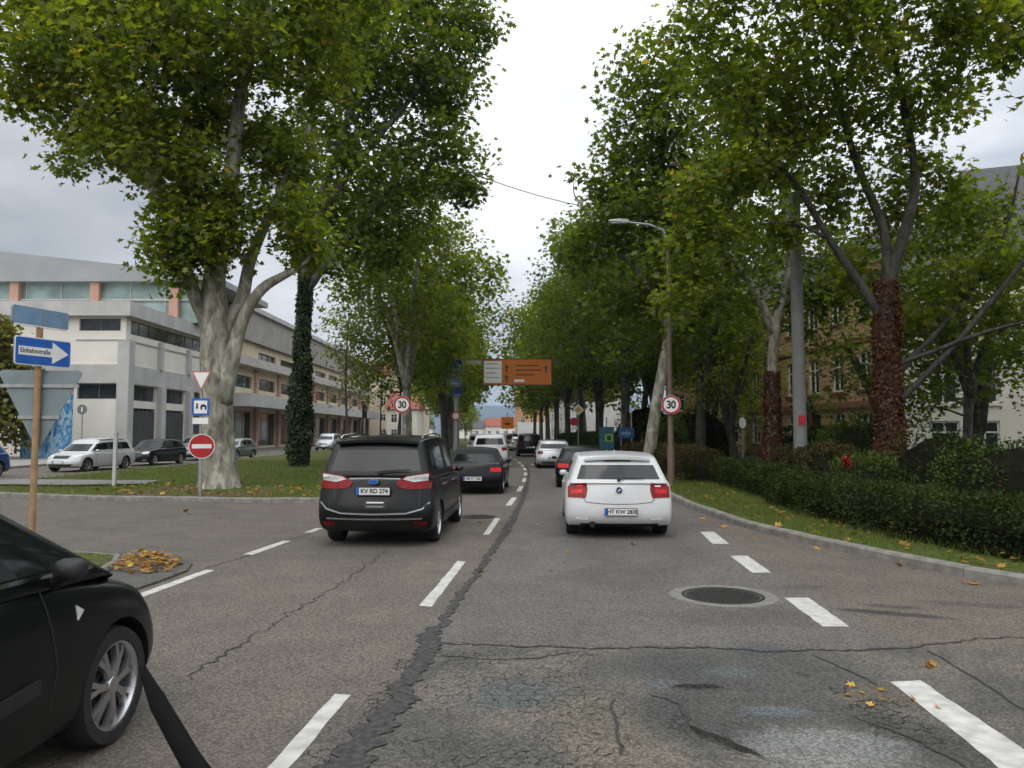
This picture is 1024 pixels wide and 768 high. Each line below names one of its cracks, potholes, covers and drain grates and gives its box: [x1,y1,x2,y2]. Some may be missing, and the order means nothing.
pothole [683,723,767,759]
manhole cover [668,585,779,608]
